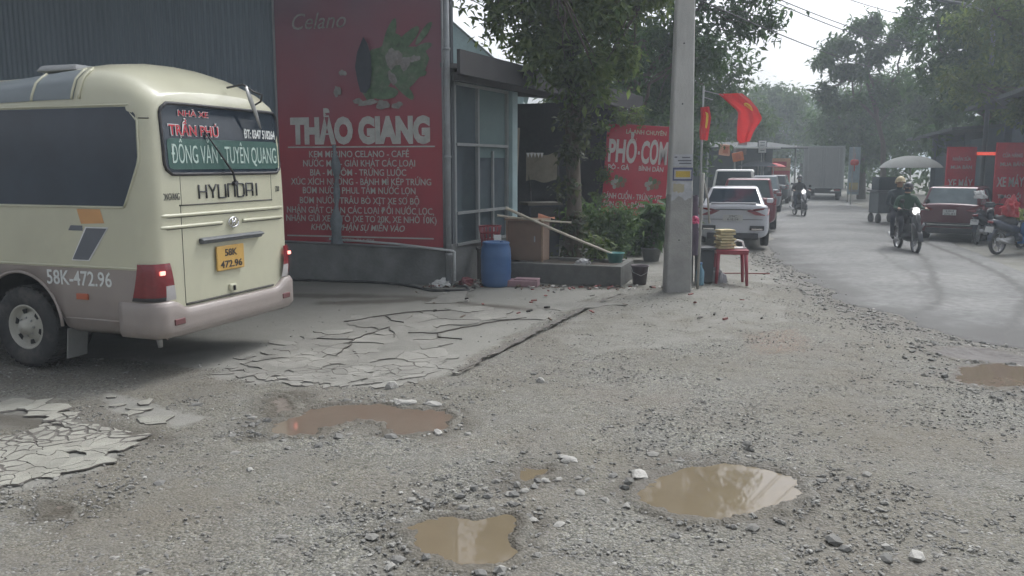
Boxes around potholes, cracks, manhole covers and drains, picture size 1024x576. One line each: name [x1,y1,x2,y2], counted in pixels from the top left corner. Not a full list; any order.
pothole [505,461,572,485]
pothole [623,458,822,527]
pothole [253,399,464,439]
crack [215,286,627,389]
crack [0,396,175,487]
pothole [943,363,1024,392]
pothole [377,509,539,575]
